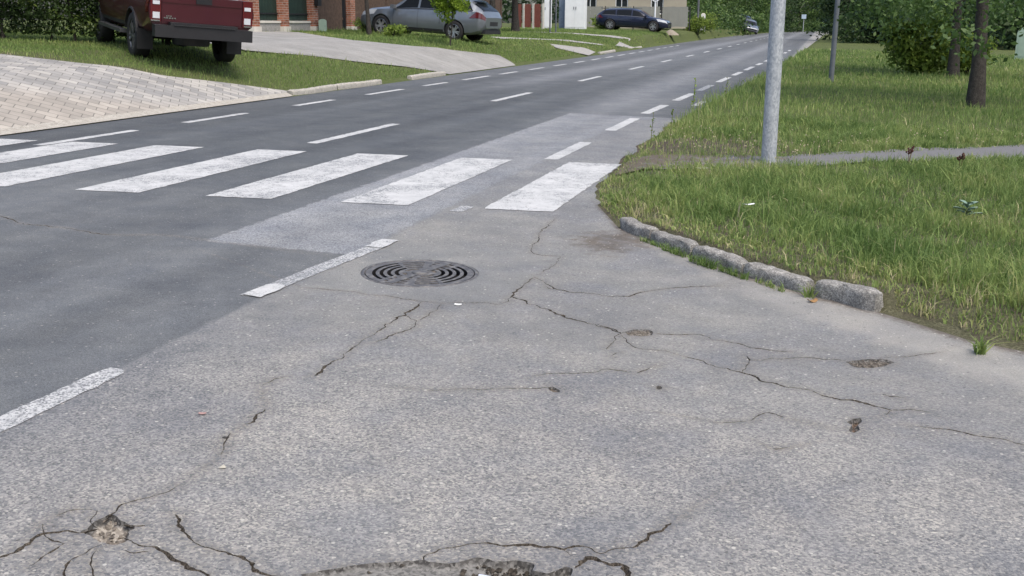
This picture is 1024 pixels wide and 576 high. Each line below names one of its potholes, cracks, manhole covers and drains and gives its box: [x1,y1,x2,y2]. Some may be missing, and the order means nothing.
crack [437,367,652,391]
pothole [81,514,135,545]
crack [301,287,497,376]
pothole [847,418,862,433]
pothole [847,359,894,368]
manhole cover [361,259,479,287]
crack [423,523,671,576]
crack [0,485,274,576]
pothole [301,557,573,576]
crack [503,220,1023,445]
